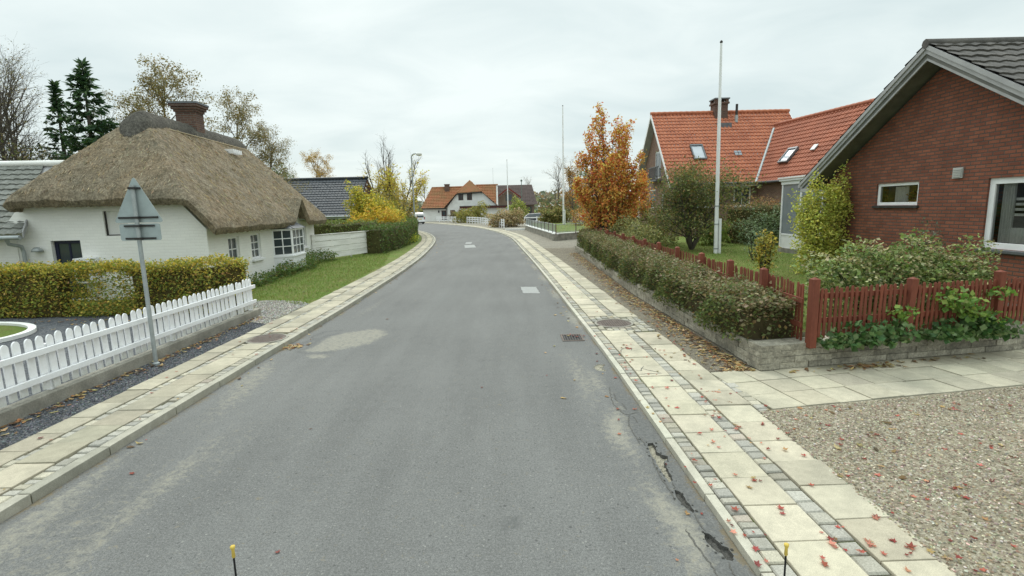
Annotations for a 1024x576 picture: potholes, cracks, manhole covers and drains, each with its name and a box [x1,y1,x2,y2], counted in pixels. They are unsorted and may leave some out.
crack [609,387,736,576]
pothole [701,531,734,561]
manhole cover [245,333,289,344]
pothole [644,442,677,482]
manhole cover [594,319,633,329]
